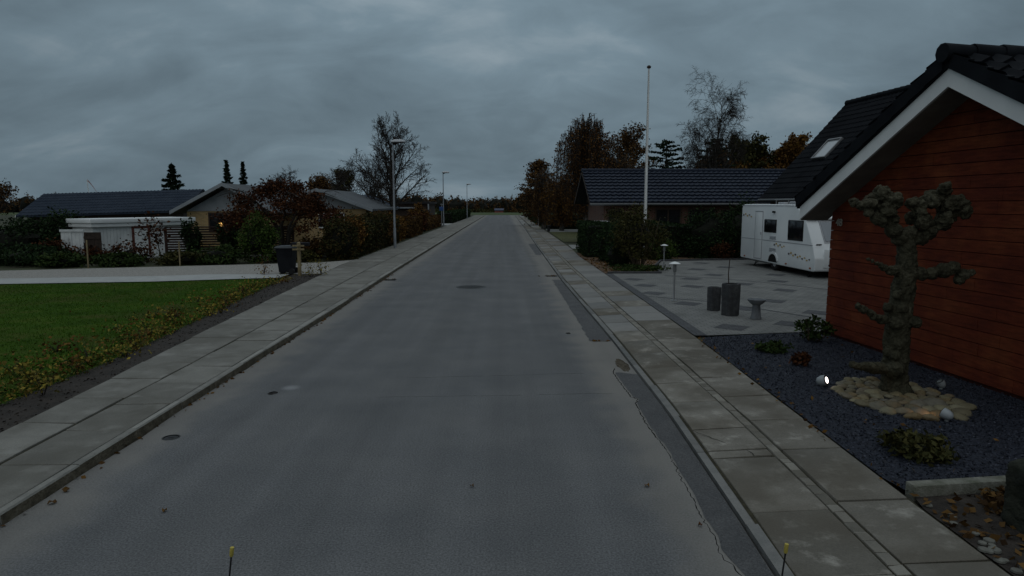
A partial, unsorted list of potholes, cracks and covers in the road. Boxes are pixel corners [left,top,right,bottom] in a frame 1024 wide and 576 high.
pothole [615,359,630,372]
